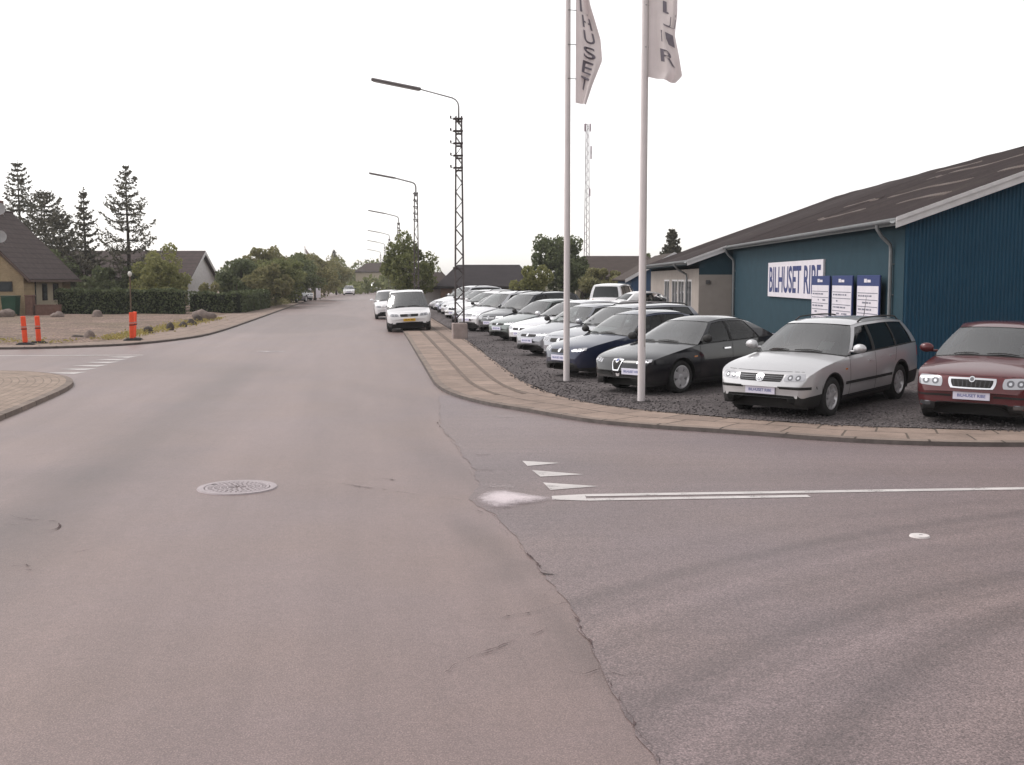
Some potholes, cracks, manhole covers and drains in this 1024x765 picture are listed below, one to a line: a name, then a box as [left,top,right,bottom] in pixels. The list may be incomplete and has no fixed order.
manhole cover [197,480,278,495]
